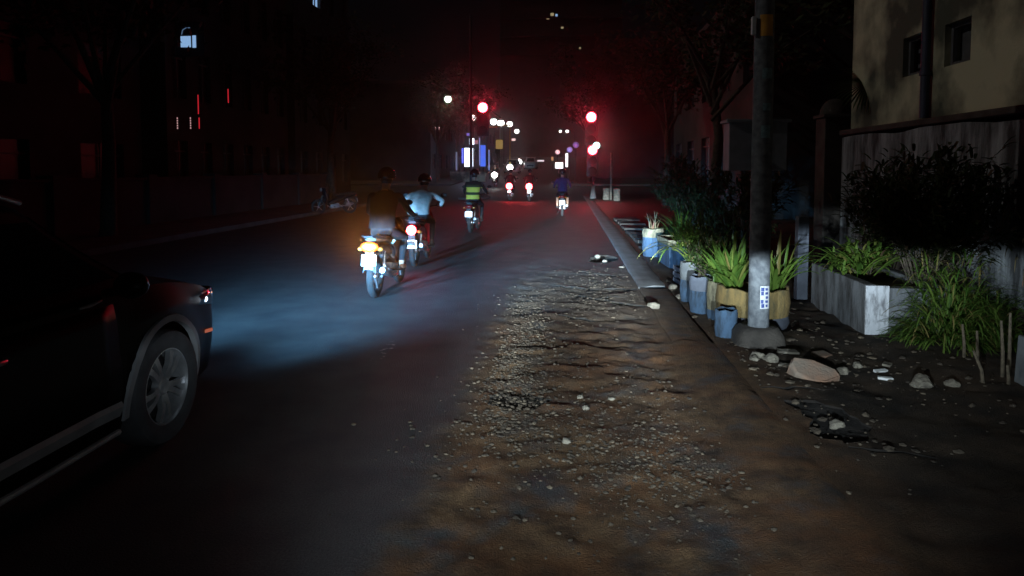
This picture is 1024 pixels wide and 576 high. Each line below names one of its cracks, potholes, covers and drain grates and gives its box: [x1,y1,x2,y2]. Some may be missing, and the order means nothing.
pothole [784,399,872,444]
pothole [487,392,552,411]
crack [555,271,646,323]
